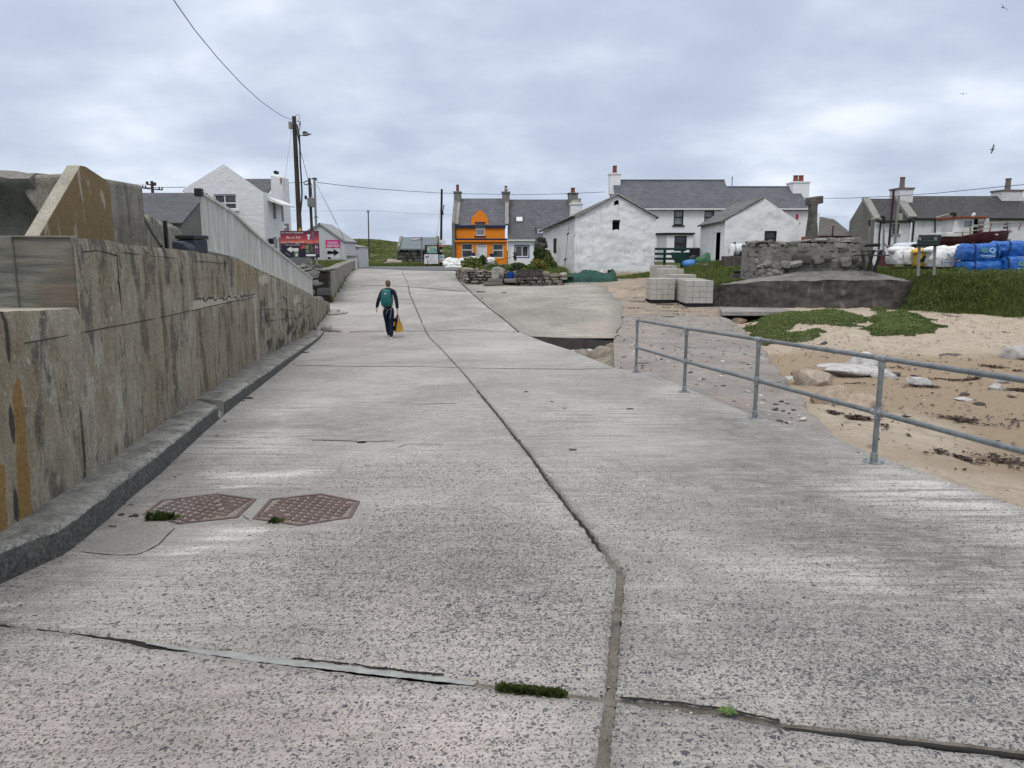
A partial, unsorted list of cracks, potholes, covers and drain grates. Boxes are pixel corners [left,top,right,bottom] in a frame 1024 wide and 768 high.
crack [81,528,175,555]
manhole cover [143,493,257,525]
manhole cover [252,493,360,526]
